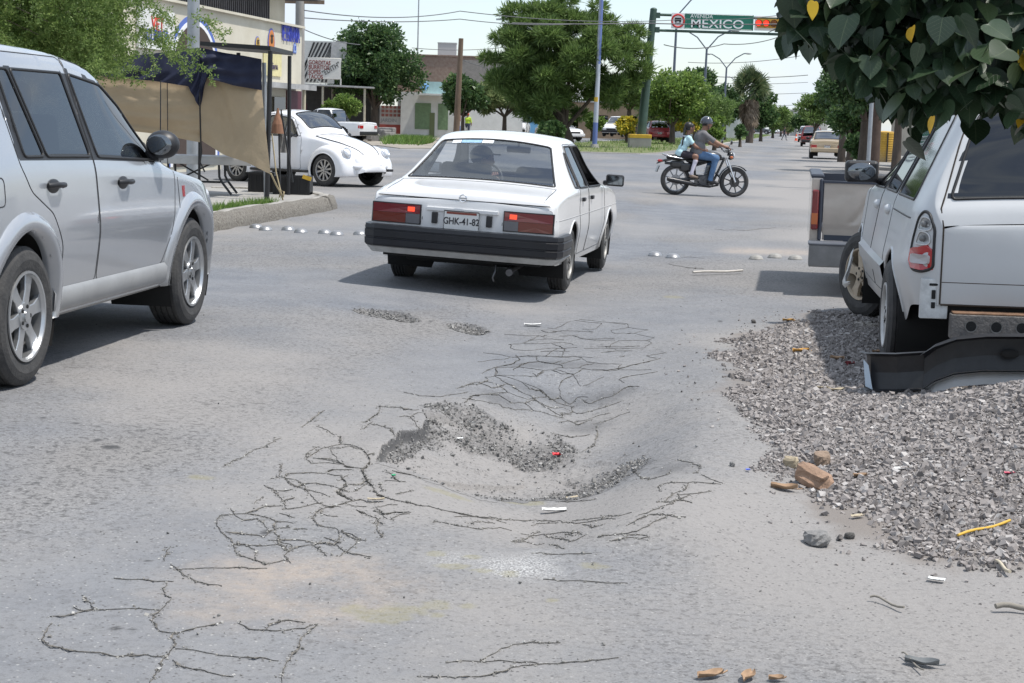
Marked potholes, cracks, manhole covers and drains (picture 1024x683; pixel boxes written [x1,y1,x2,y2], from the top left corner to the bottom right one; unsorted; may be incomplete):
pothole [350,307,421,323]
pothole [447,322,493,335]
crack [216,406,722,584]
crack [41,546,317,681]
crack [406,319,666,454]
pothole [376,399,659,503]
